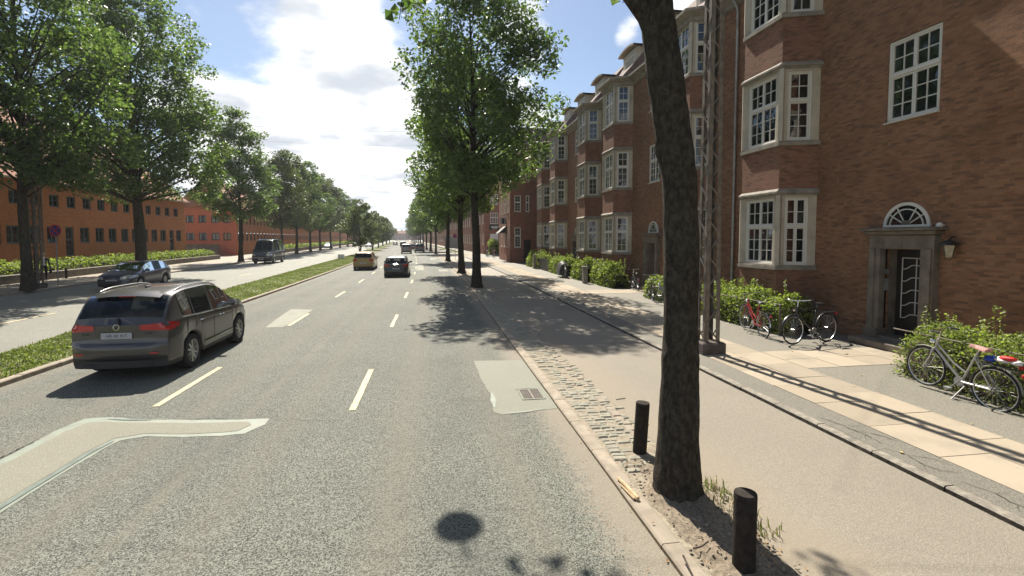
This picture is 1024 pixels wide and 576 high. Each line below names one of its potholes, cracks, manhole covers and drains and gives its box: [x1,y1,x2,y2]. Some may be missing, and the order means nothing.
drain grate [515,388,546,400]
